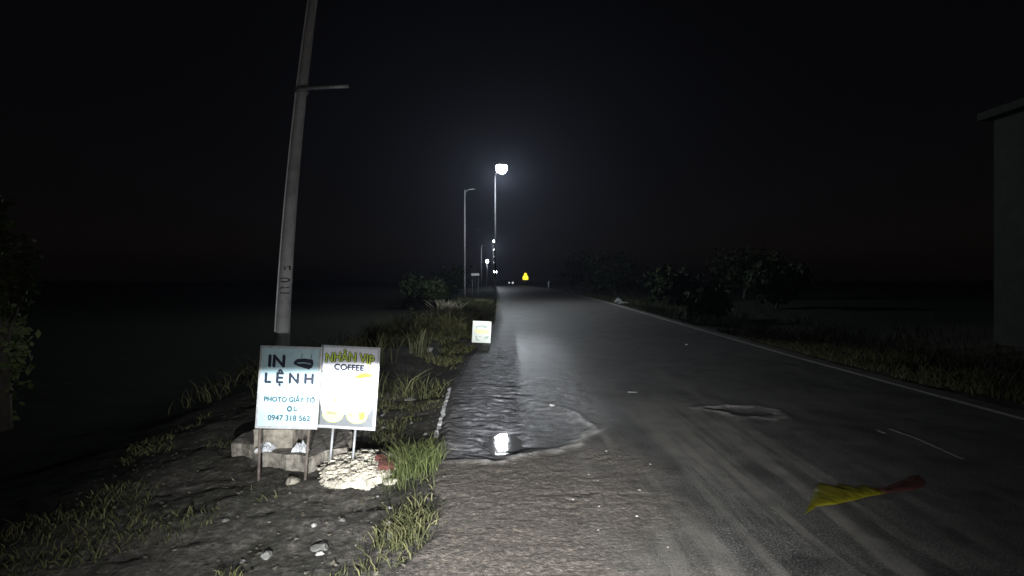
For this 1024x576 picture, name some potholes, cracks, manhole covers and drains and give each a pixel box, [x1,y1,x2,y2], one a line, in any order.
pothole [704,405,782,419]
pothole [442,399,593,461]
